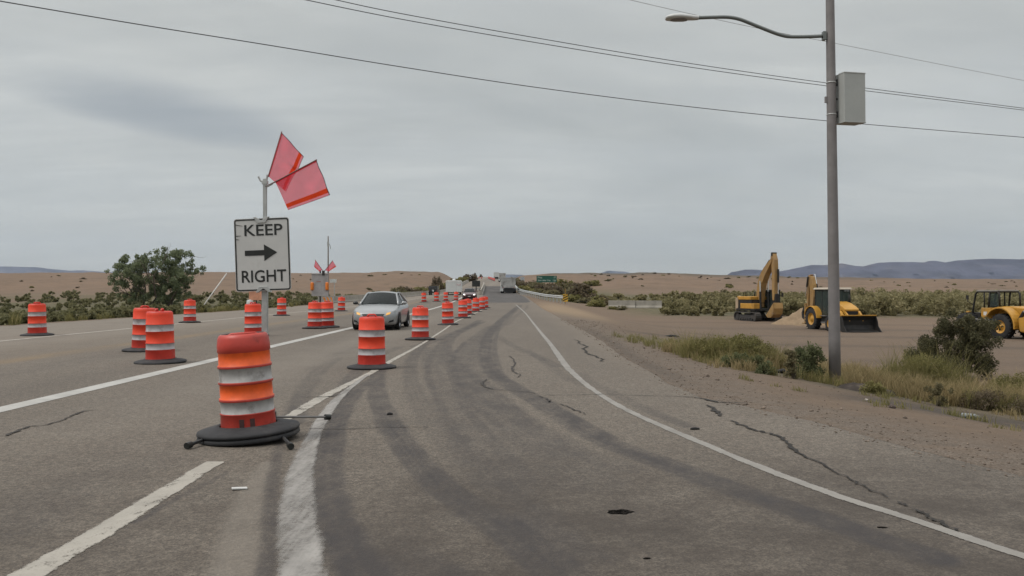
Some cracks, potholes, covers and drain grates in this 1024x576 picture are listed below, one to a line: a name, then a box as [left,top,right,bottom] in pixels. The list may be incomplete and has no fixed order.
crack [577,394,959,530]
crack [6,409,95,435]
